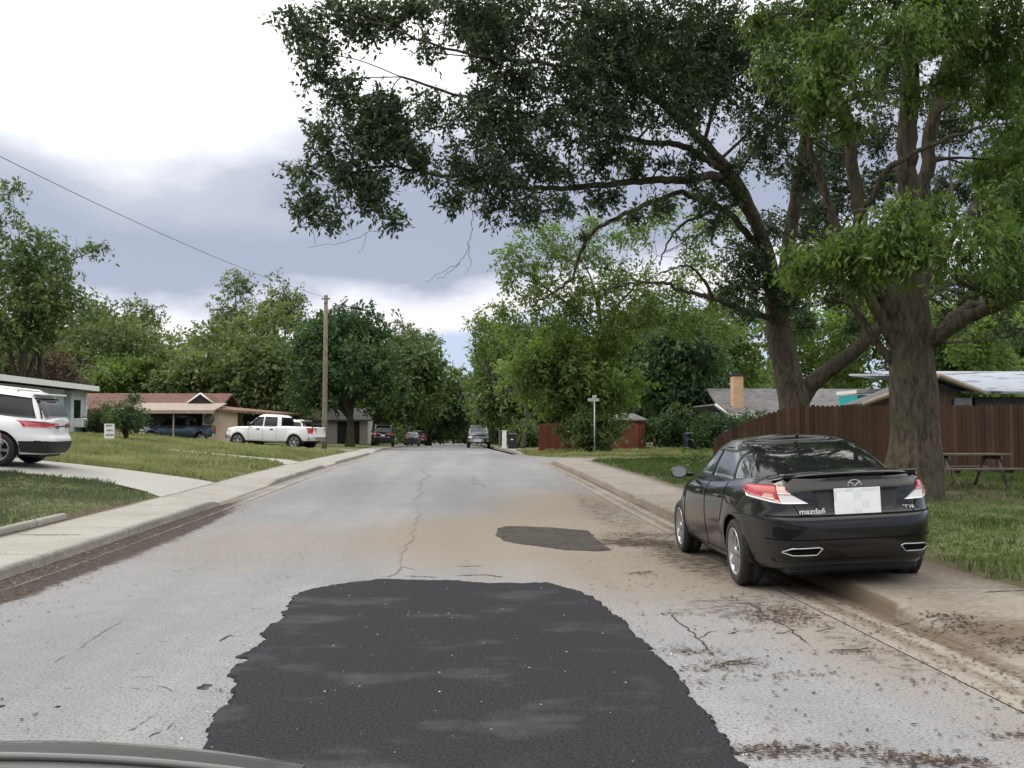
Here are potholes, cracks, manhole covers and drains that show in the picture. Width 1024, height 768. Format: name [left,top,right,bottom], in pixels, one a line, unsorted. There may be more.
crack [731,595,810,645]
crack [387,469,431,577]
crack [666,611,740,659]
